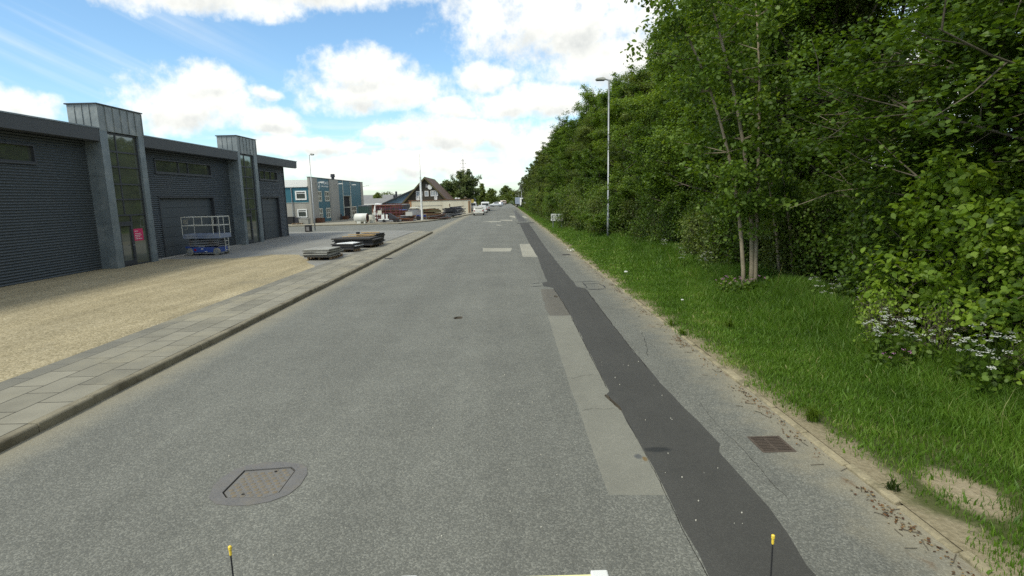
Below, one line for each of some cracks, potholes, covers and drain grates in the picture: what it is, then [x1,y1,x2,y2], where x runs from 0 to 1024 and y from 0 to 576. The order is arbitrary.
manhole cover [208,462,307,506]
drain grate [747,436,797,453]
